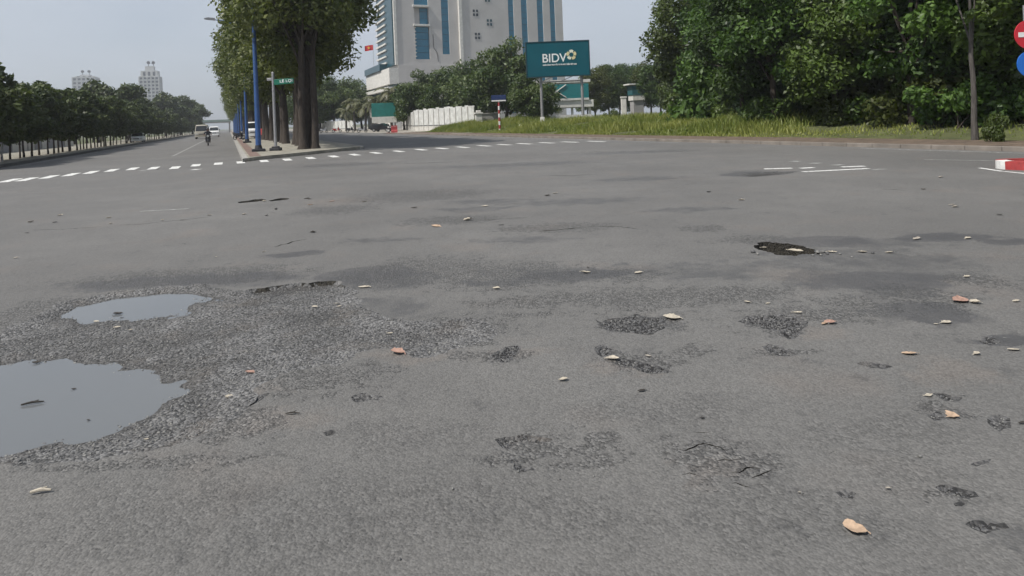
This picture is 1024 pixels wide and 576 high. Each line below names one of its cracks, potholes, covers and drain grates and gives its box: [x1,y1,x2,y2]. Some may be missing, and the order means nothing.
pothole [0,281,498,467]
crack [679,432,771,487]
pothole [936,485,979,499]
pothole [738,314,809,339]
pothole [966,520,1009,534]
pothole [488,345,521,363]
pothole [596,314,669,335]
pothole [754,242,816,256]
